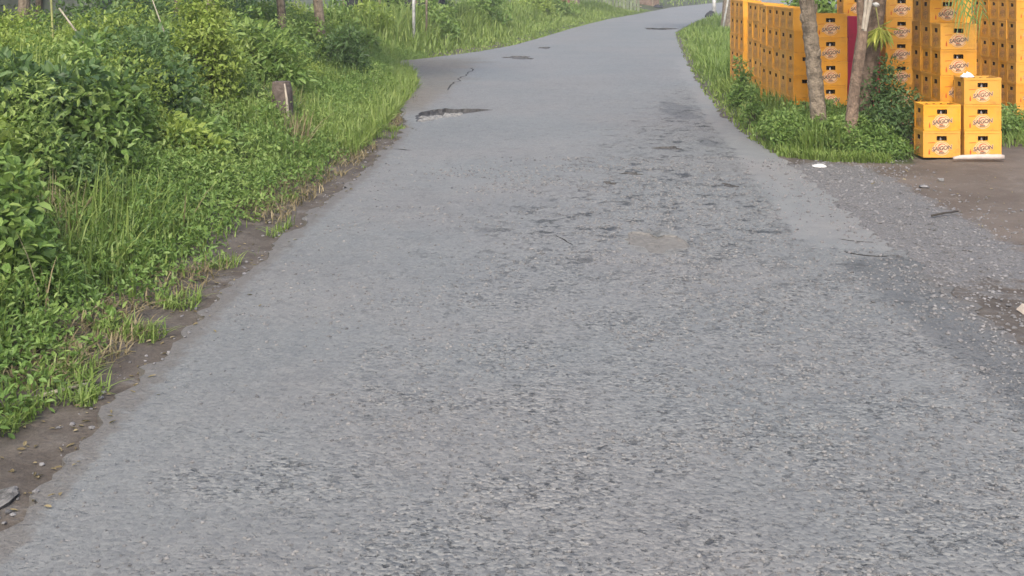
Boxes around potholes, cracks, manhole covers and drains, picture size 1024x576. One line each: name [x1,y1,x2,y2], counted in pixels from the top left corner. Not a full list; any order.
pothole [415,108,488,122]
